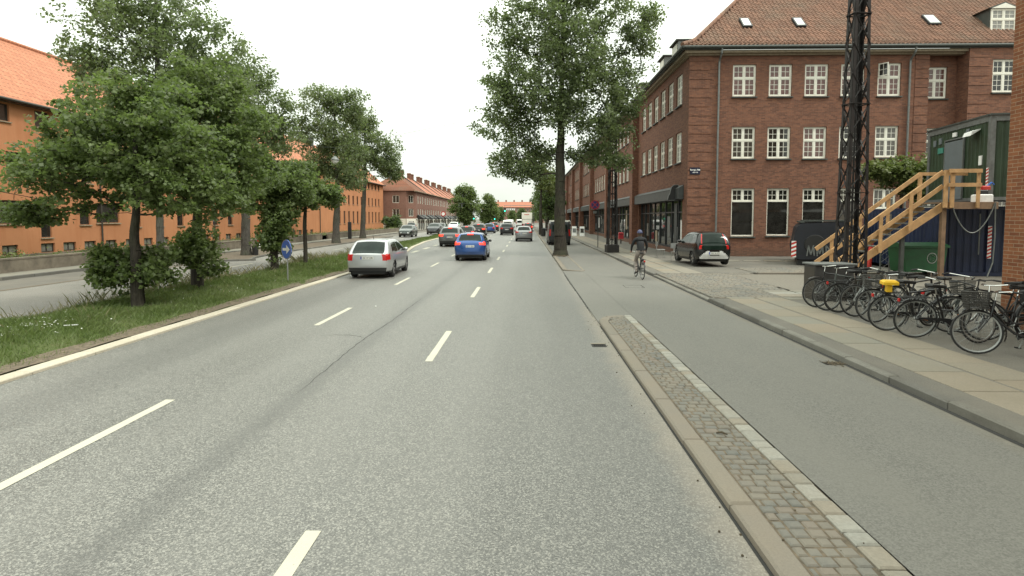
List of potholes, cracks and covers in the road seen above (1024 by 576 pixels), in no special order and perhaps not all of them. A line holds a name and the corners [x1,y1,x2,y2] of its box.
crack [304,304,414,388]
